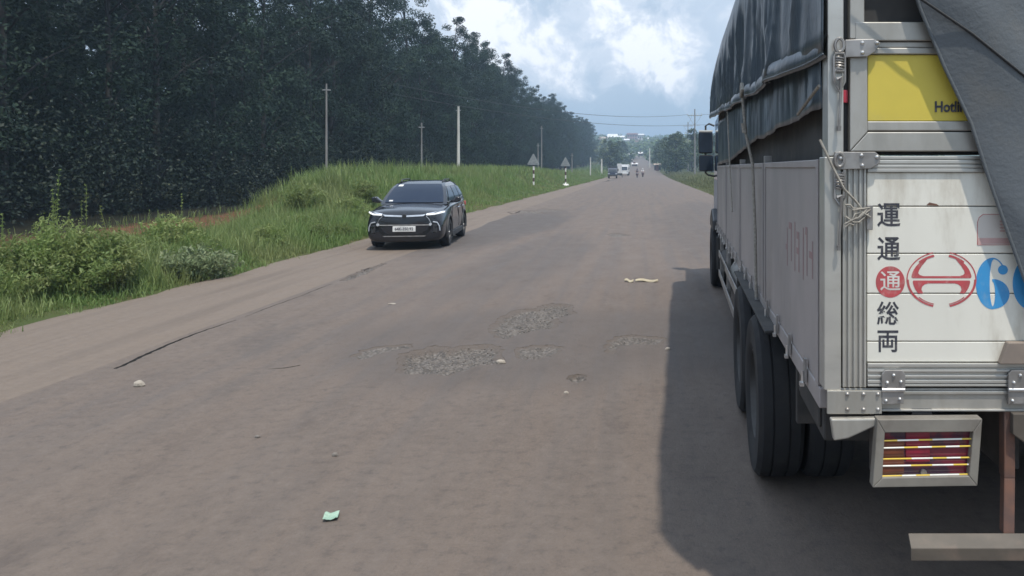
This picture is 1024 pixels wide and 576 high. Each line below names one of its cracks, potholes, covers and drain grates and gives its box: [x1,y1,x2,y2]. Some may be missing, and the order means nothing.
pothole [349,344,413,360]
pothole [514,345,565,360]
pothole [603,335,667,355]
pothole [395,344,505,376]
crack [114,320,235,369]
pothole [488,303,578,339]
pothole [566,374,587,384]
